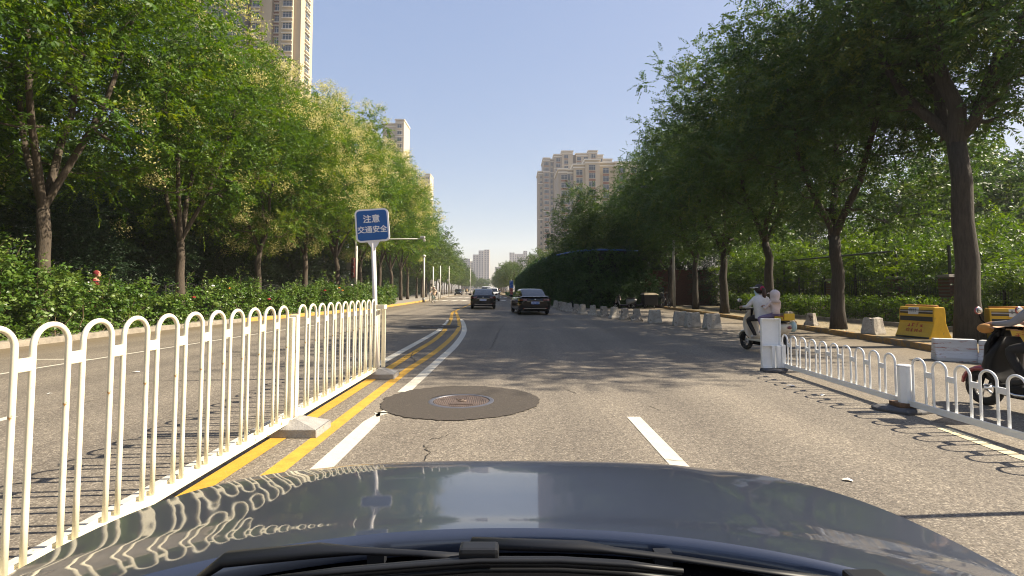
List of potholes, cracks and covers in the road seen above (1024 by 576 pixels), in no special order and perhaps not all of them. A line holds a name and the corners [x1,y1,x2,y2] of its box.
manhole cover [428,394,494,408]
